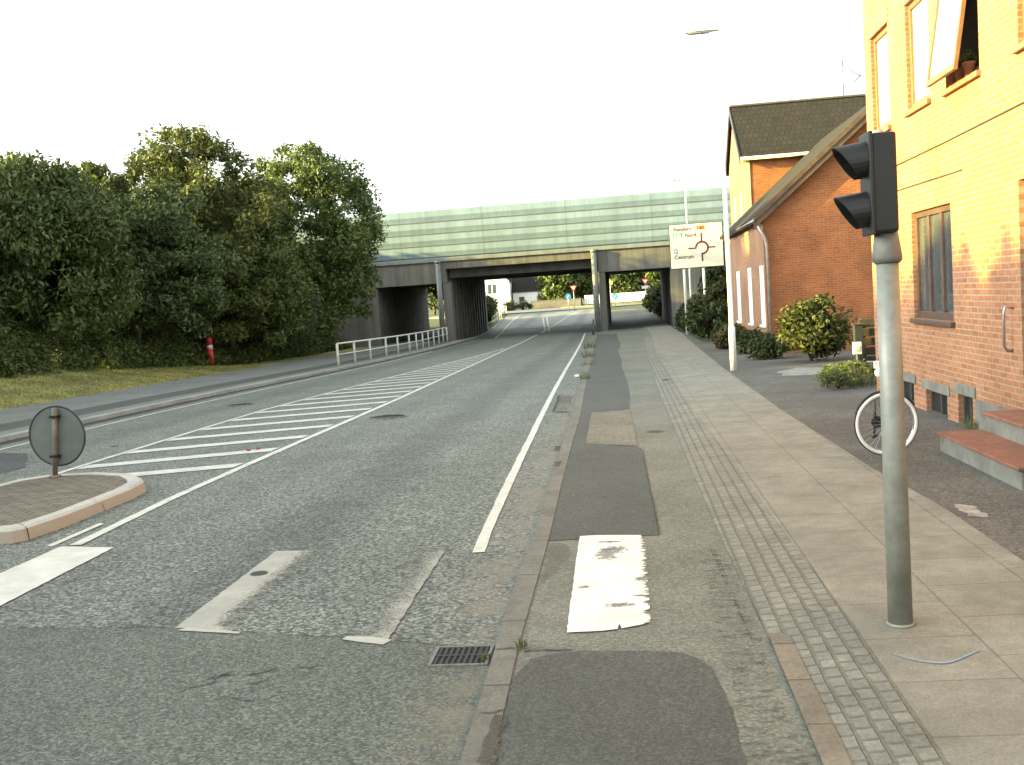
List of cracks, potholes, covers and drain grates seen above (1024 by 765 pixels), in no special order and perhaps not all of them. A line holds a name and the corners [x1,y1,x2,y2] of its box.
drain grate [427,644,495,667]
crack [171,669,272,702]
